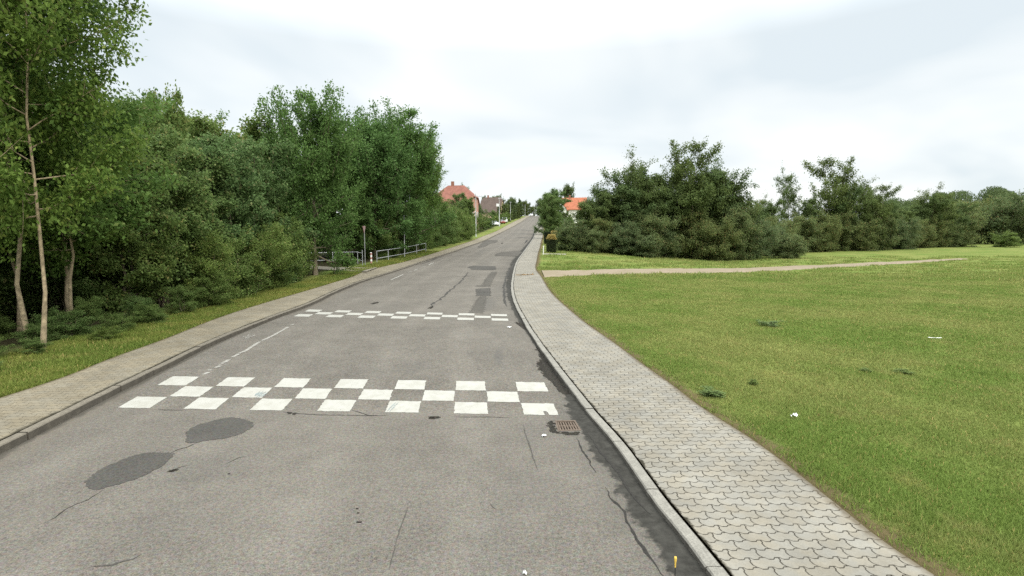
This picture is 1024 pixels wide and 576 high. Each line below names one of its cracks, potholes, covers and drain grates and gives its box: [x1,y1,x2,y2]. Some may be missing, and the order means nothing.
crack [578,437,661,573]
crack [390,508,408,566]
drain grate [555,420,581,431]
crack [422,256,468,306]
